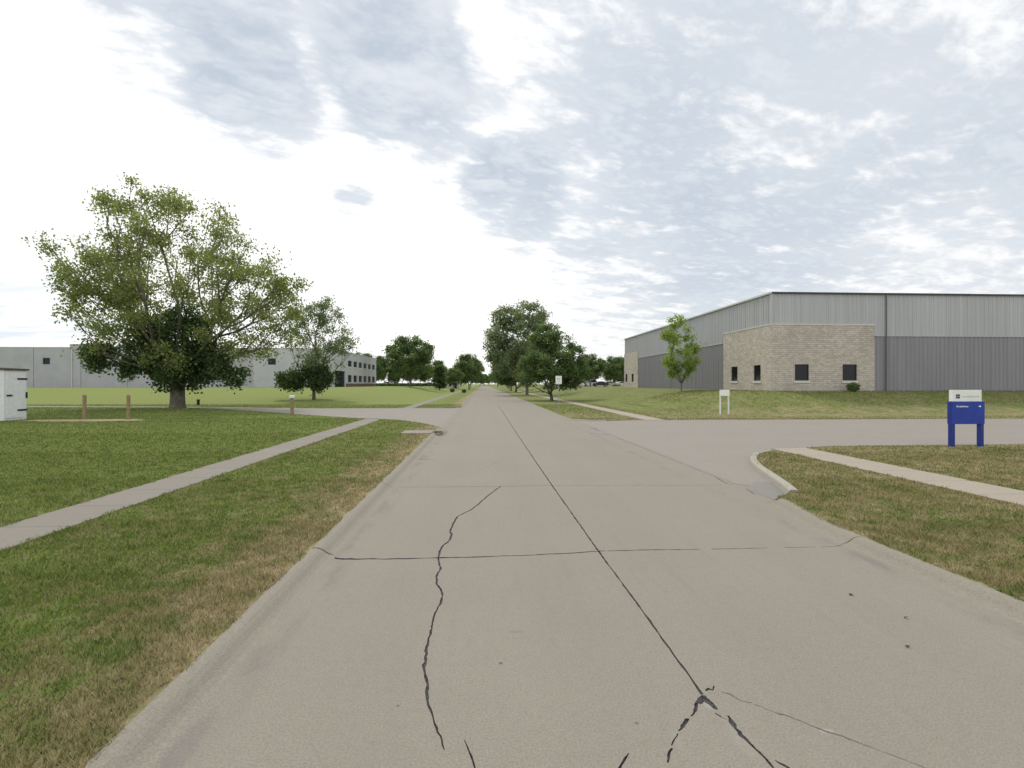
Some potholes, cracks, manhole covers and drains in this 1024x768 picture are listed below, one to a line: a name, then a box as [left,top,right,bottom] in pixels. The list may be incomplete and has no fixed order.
crack [335,405,925,768]
